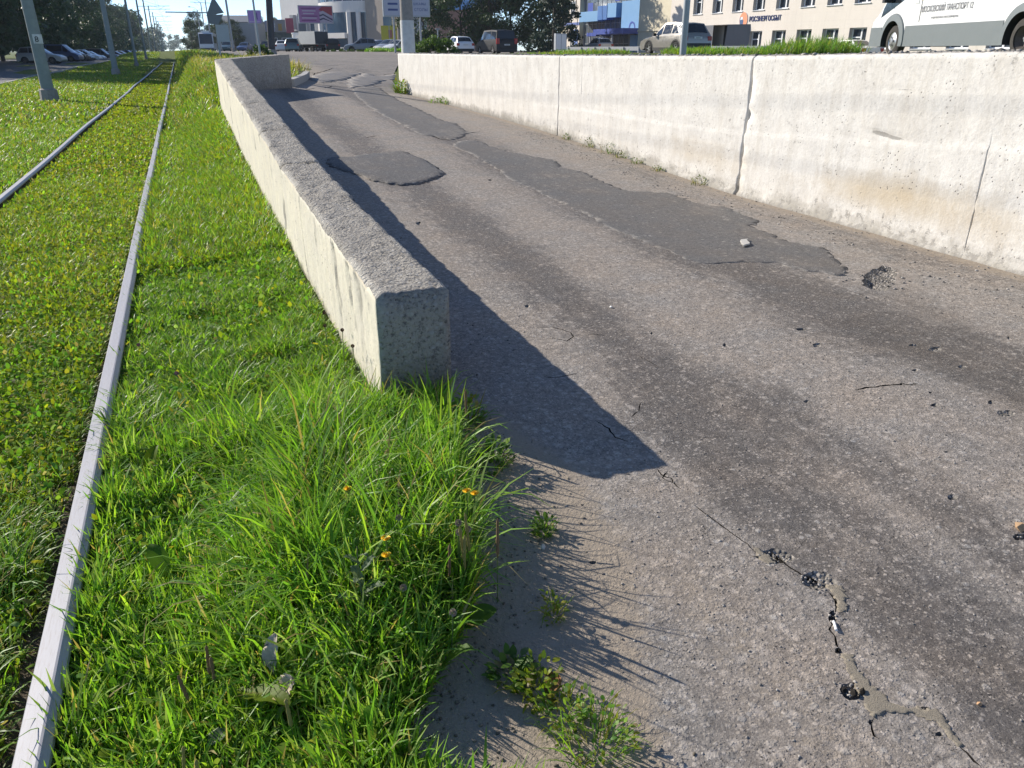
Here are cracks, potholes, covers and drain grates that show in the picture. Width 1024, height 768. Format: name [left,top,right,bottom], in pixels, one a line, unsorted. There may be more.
crack [657,469,839,652]
pothole [861,266,897,291]
